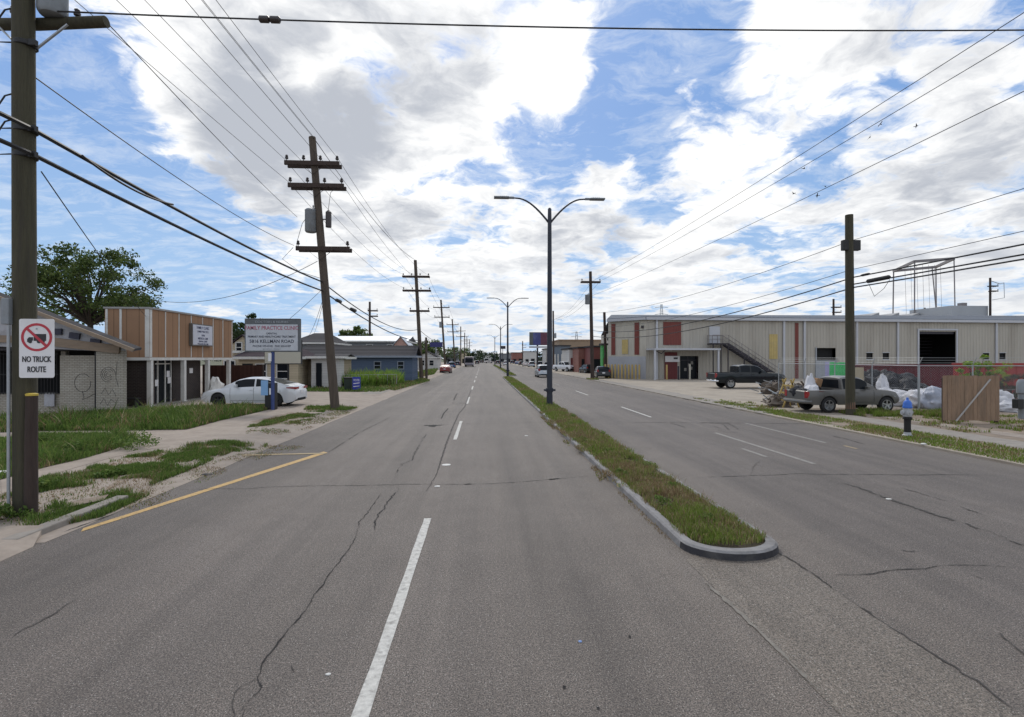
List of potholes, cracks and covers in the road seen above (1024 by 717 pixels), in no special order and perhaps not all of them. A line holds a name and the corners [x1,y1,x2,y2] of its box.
crack [232,394,457,717]
crack [835,550,1007,575]
